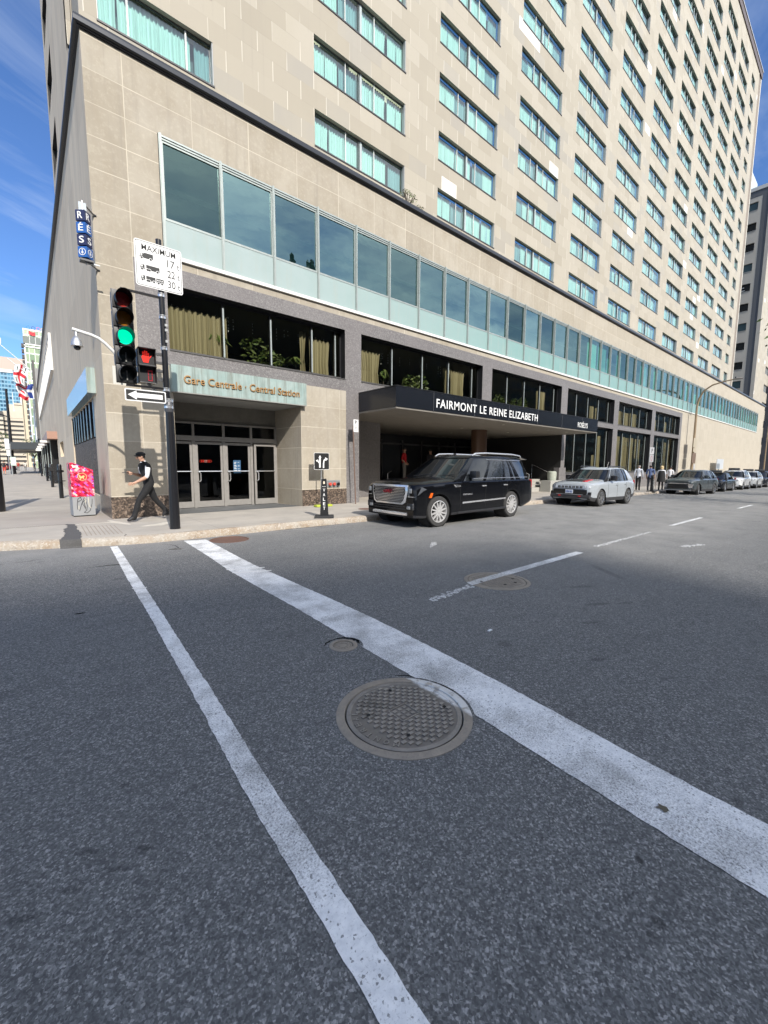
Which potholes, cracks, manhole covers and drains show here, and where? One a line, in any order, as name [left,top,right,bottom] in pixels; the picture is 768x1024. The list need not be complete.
manhole cover [336,678,473,761]
manhole cover [464,572,531,590]
manhole cover [329,639,357,652]
